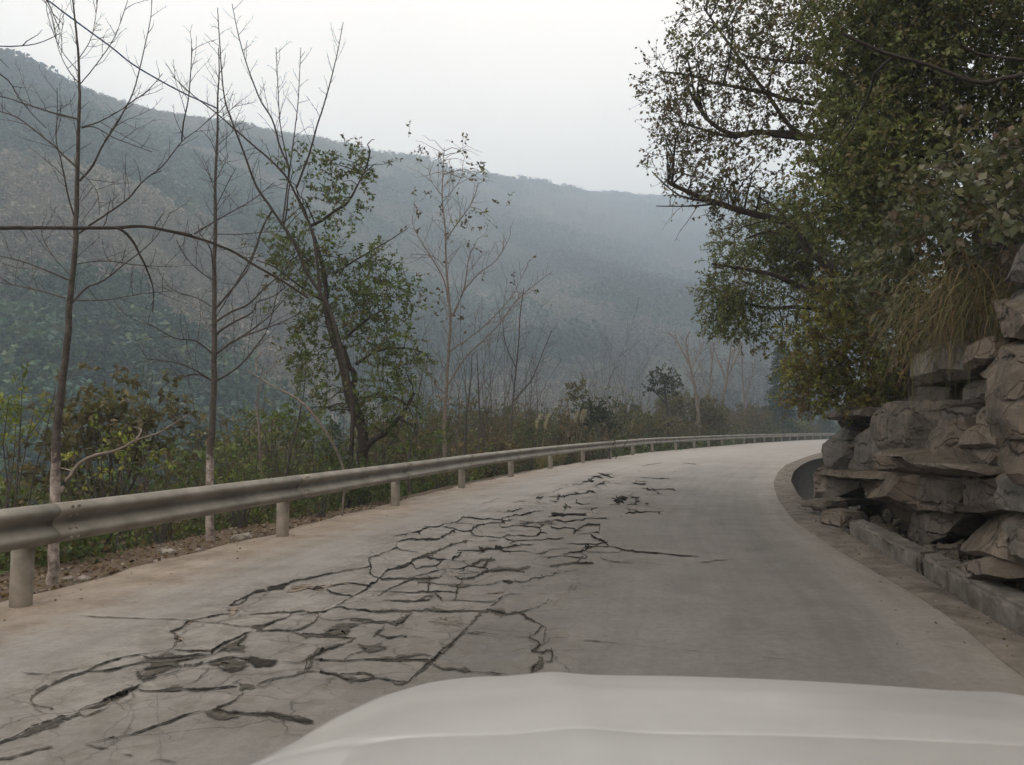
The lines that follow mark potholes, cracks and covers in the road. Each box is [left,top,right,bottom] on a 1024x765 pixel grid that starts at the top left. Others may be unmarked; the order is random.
crack [0,463,714,759]
